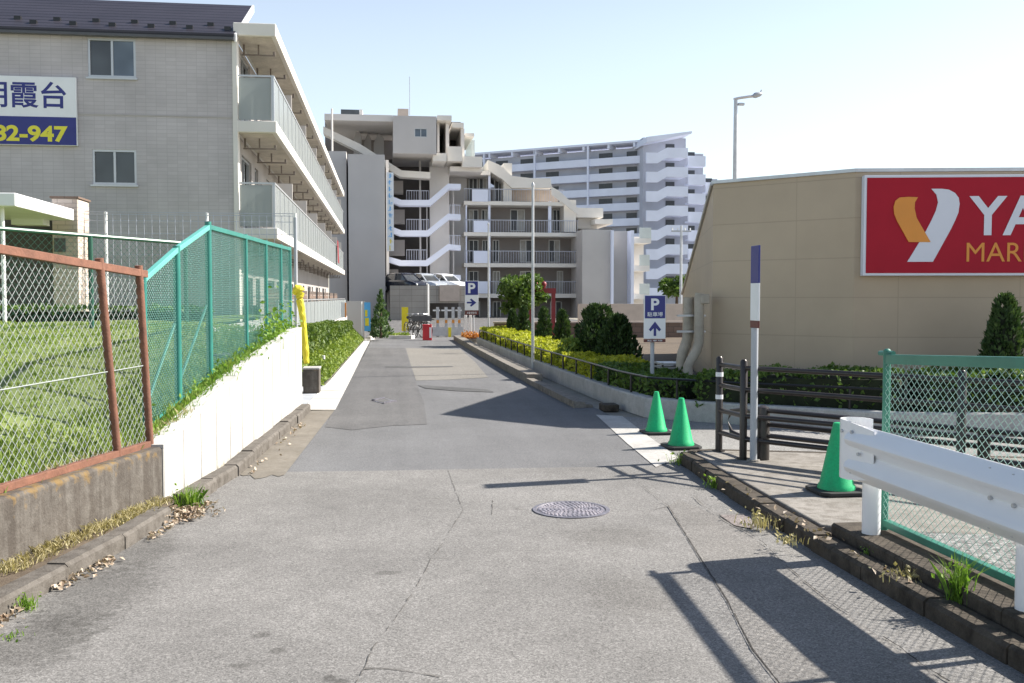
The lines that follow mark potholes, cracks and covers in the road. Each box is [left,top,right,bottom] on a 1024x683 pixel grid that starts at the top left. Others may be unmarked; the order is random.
manhole cover [533,501,610,518]
crack [356,471,463,682]
